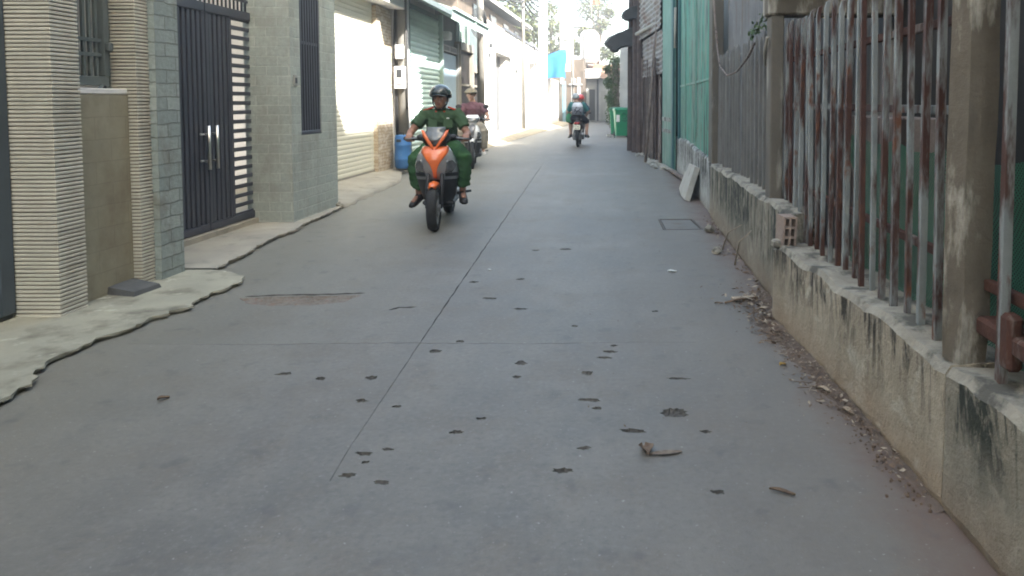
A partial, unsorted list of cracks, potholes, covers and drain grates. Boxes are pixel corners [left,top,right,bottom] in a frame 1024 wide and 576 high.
pothole [661,408,688,417]
manhole cover [658,219,704,230]
